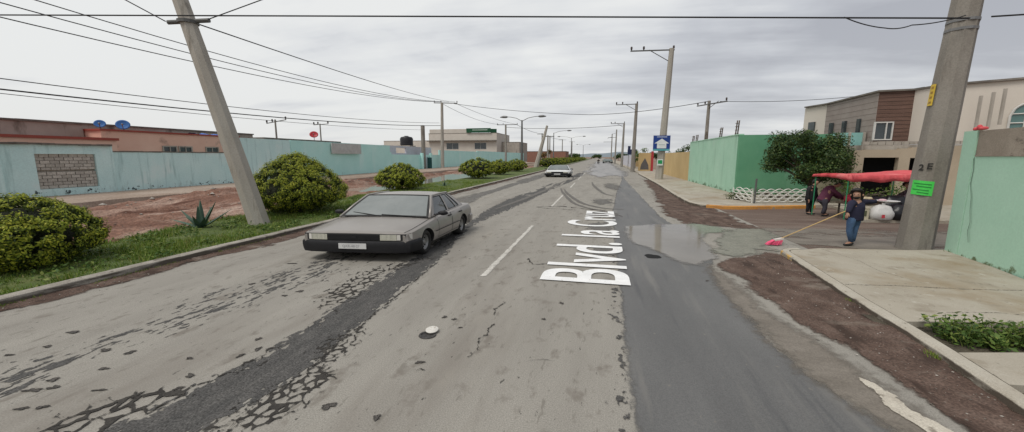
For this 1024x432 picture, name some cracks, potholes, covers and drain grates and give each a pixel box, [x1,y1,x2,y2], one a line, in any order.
crack [37,255,439,432]
